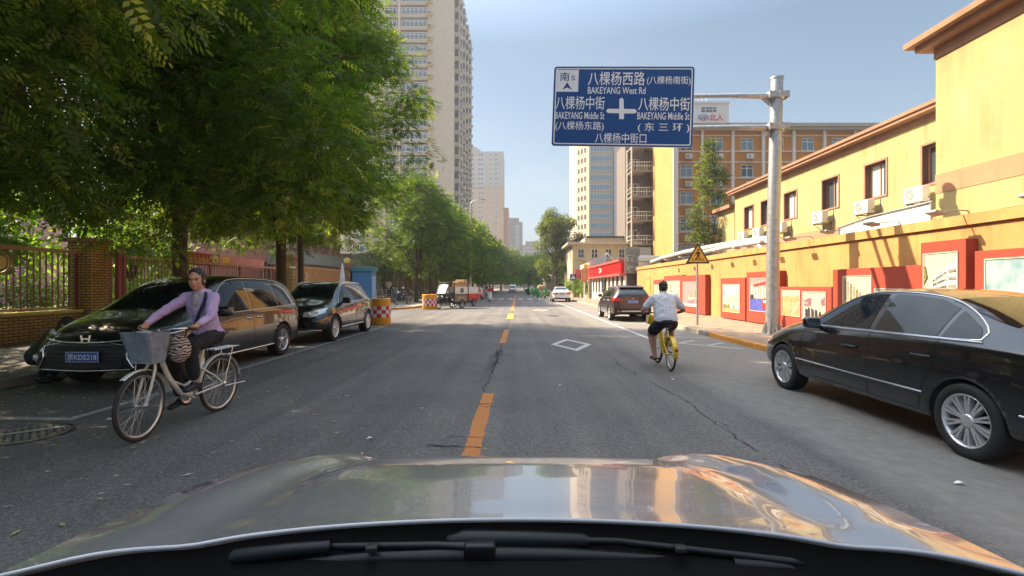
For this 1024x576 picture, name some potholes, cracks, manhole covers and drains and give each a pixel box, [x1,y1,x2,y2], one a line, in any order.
crack [469,346,518,407]
manhole cover [0,423,77,446]
crack [613,358,791,470]
